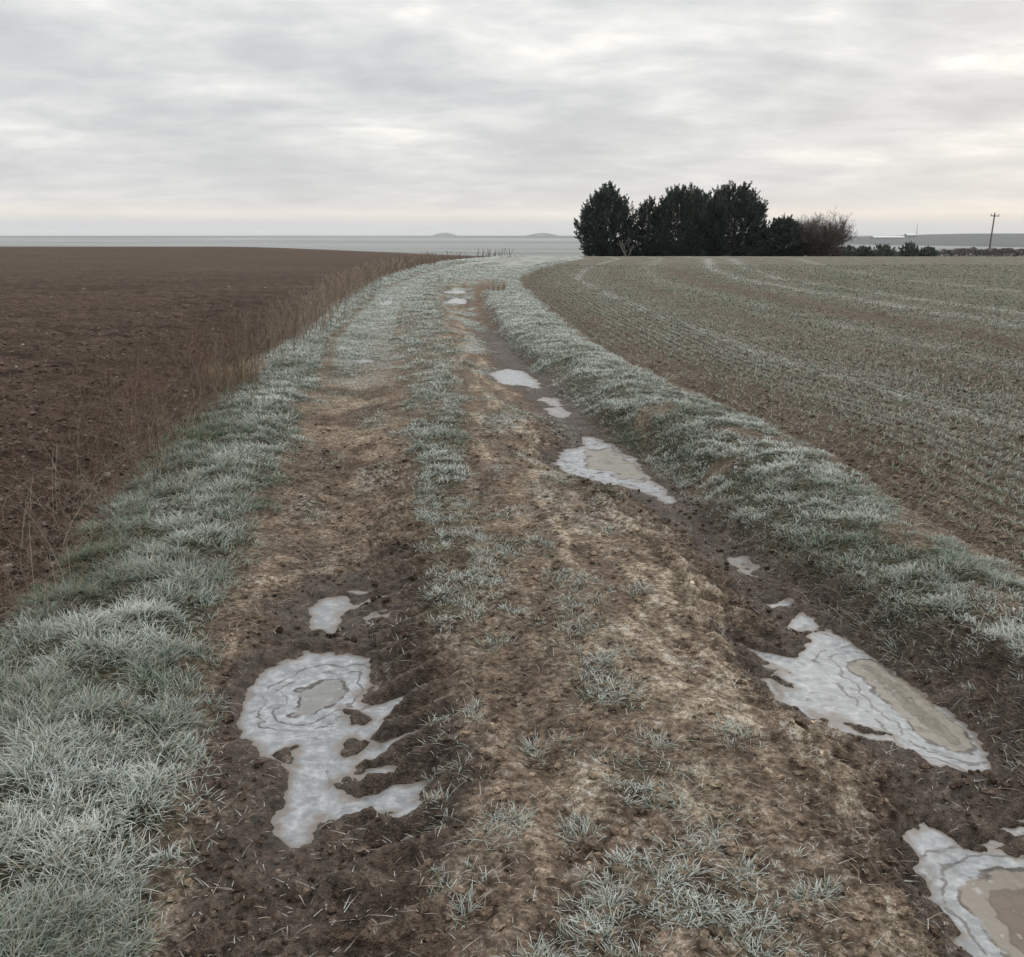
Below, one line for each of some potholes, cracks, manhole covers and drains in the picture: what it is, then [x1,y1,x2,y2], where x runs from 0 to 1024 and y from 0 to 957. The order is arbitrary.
pothole [718,583,1024,784]
pothole [876,785,1024,957]
pothole [282,575,415,634]
pothole [530,428,703,509]
pothole [478,365,556,390]
pothole [203,630,473,866]
